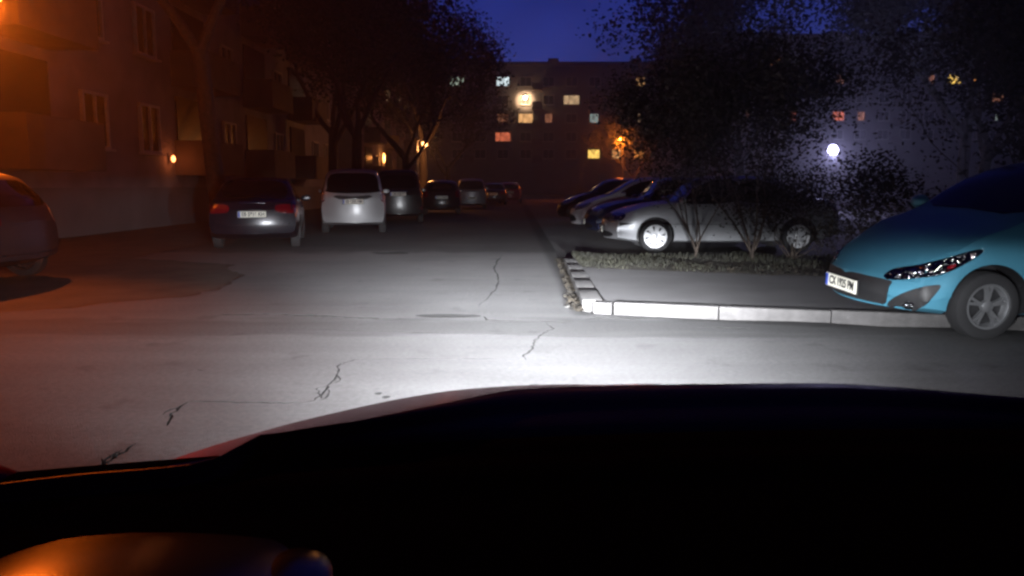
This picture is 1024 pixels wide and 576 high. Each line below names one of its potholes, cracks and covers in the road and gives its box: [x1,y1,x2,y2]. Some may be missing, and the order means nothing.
crack [101,444,135,465]
crack [222,255,762,360]
crack [164,358,474,425]
